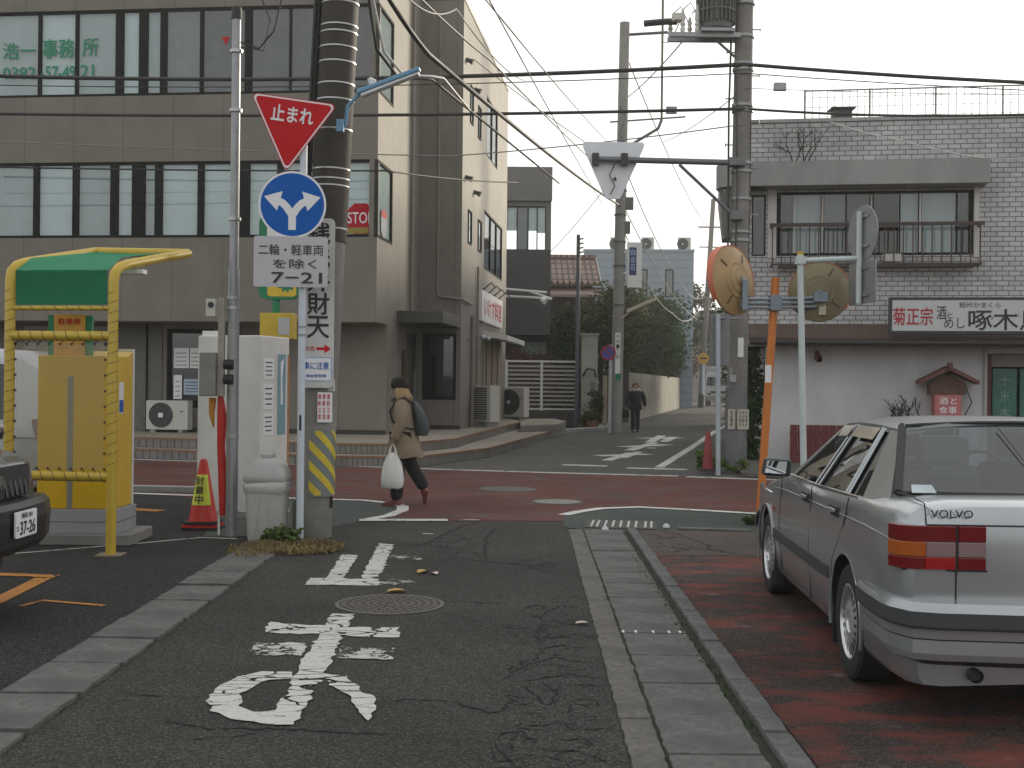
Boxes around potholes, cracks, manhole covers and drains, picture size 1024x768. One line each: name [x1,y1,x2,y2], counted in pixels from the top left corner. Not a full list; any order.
manhole cover [335,594,444,615]
crack [653,531,744,554]
crack [375,595,625,768]
crack [406,522,560,572]
